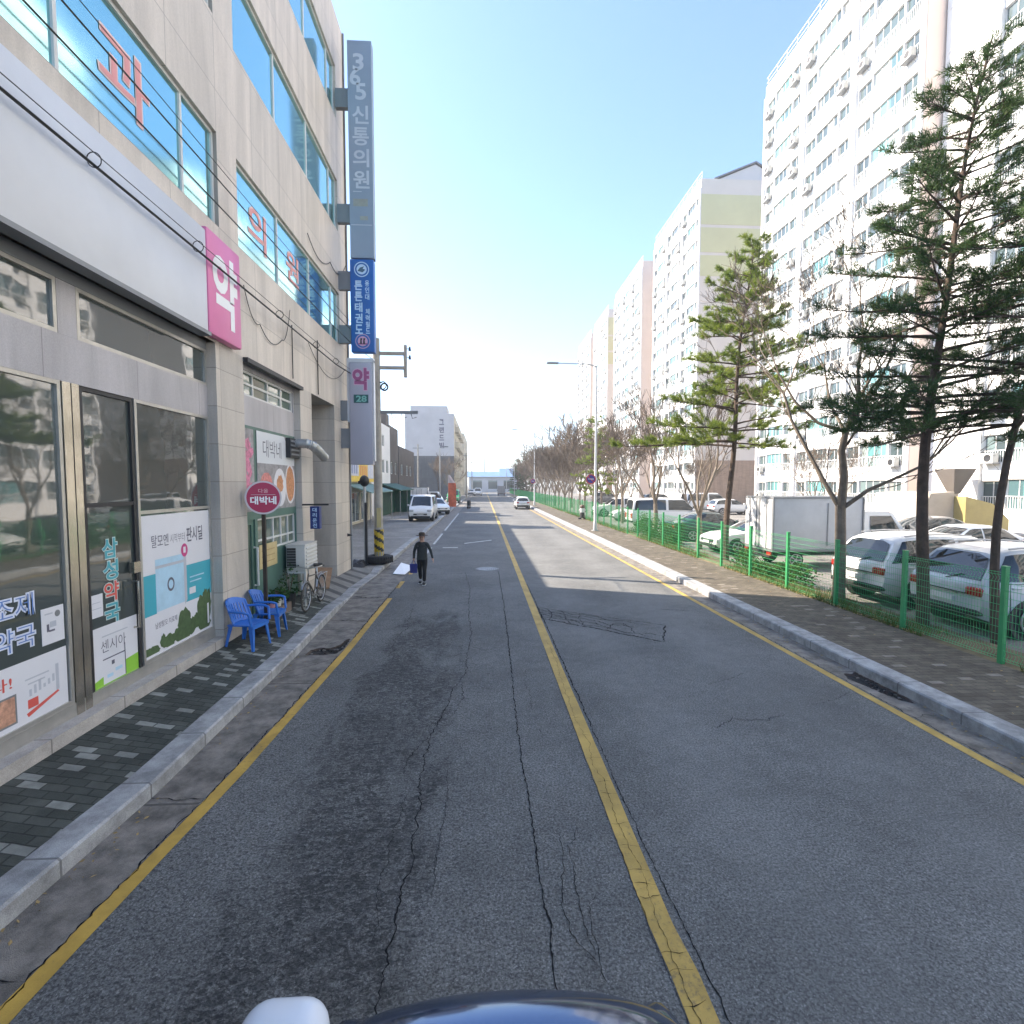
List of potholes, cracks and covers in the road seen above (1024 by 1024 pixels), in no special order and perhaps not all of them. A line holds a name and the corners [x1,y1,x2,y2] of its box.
crack [498,572,616,992]
crack [369,576,491,1015]
